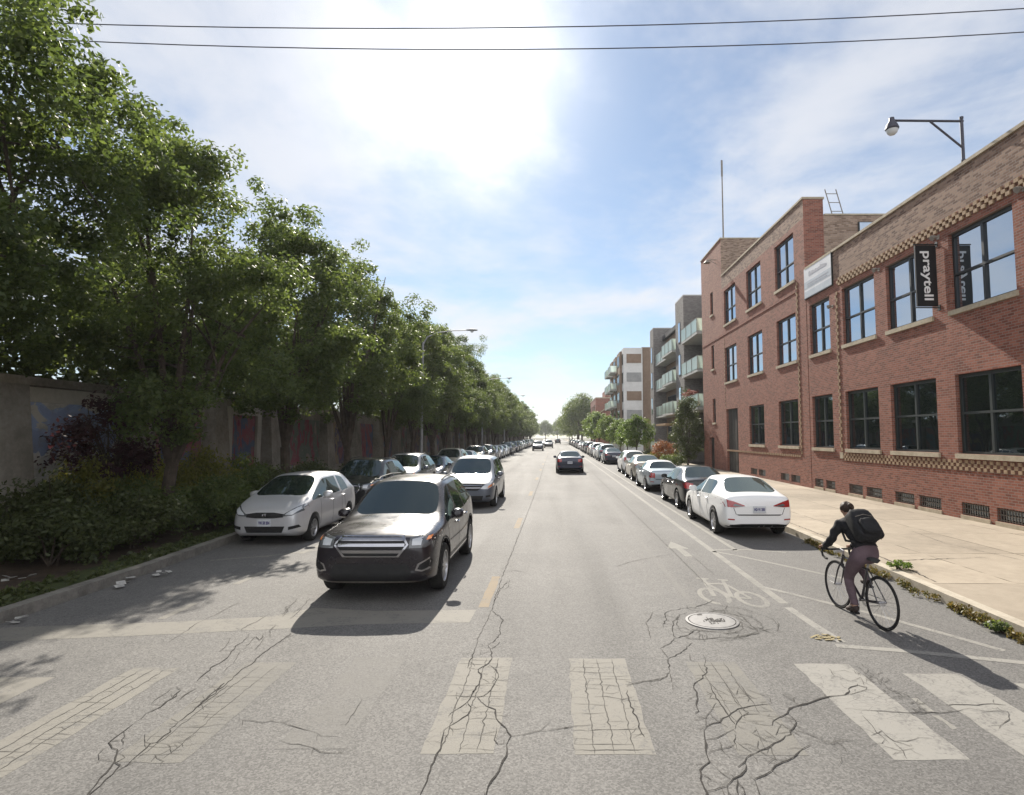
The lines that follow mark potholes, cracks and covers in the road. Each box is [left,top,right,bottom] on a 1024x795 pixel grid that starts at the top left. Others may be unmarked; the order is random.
crack [87,601,307,795]
crack [420,584,786,795]
crack [241,703,360,755]
crack [689,663,1010,795]
manhole cover [685,613,739,630]
